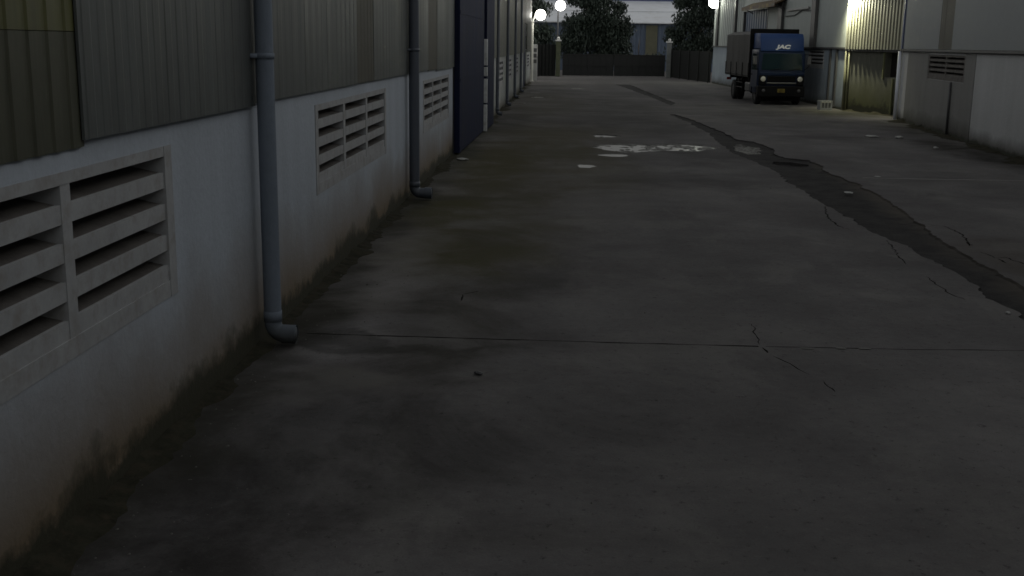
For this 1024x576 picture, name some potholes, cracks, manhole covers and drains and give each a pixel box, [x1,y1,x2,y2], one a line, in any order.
crack [751,324,835,391]
crack [945,226,1024,264]
